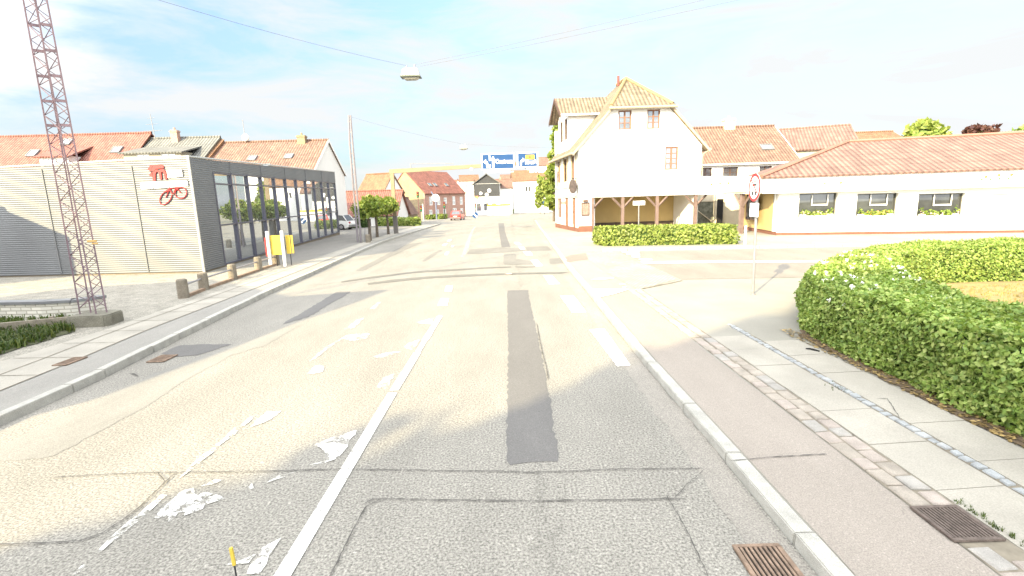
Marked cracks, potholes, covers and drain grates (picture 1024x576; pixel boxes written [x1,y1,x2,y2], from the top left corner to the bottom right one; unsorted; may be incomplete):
drain grate [732,543,804,576]
drain grate [51,356,88,366]
drain grate [146,354,178,363]
drain grate [909,505,1006,543]
